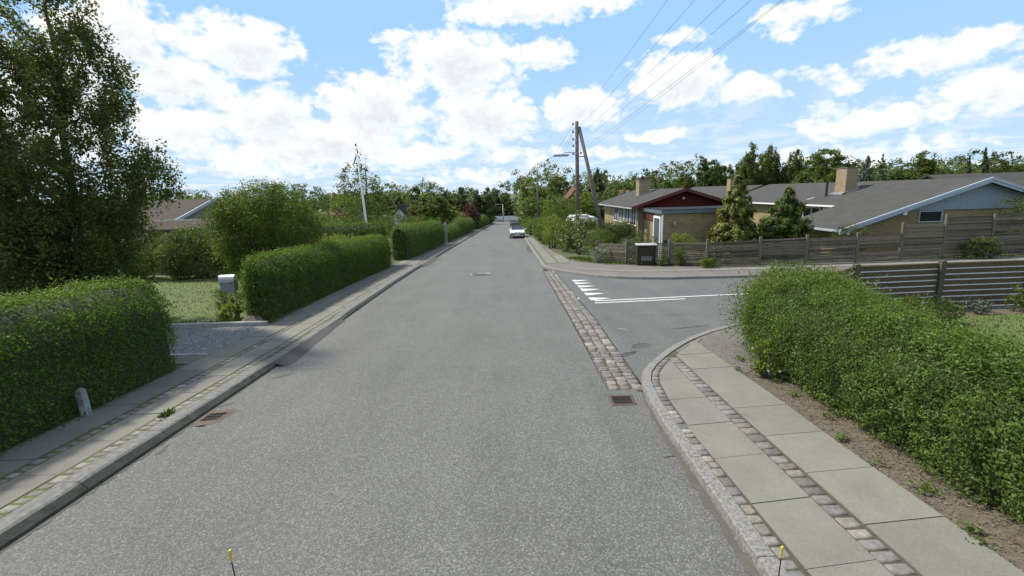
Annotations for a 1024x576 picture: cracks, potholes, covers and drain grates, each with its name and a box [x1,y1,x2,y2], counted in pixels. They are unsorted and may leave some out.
drain grate [193,411,233,424]
drain grate [607,395,637,406]
